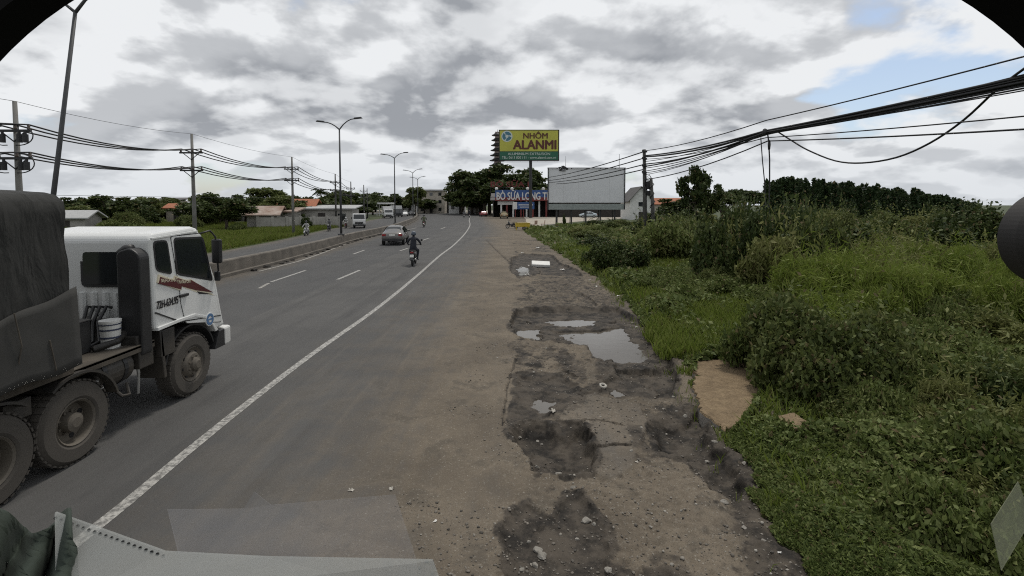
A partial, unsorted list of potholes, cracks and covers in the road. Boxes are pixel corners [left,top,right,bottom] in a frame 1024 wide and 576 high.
pothole [507,419,599,475]
pothole [512,371,603,421]
pothole [509,305,680,399]
pothole [496,489,611,576]
pothole [646,404,752,505]
pothole [510,253,583,278]
